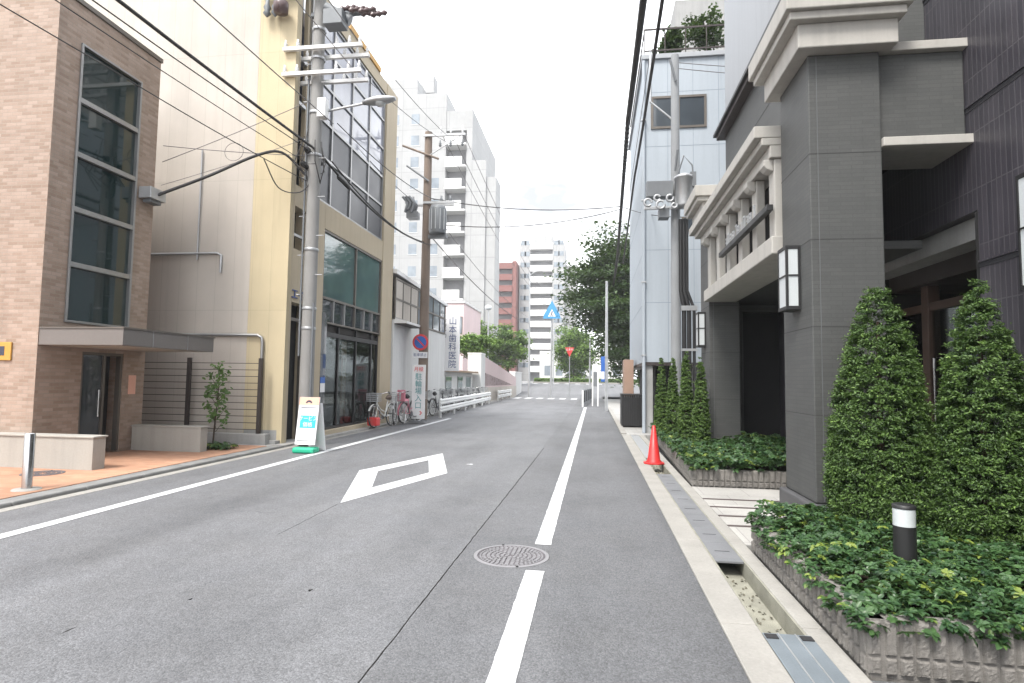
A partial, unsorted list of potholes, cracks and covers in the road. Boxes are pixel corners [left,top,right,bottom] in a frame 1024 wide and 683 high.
manhole cover [474,544,549,568]
